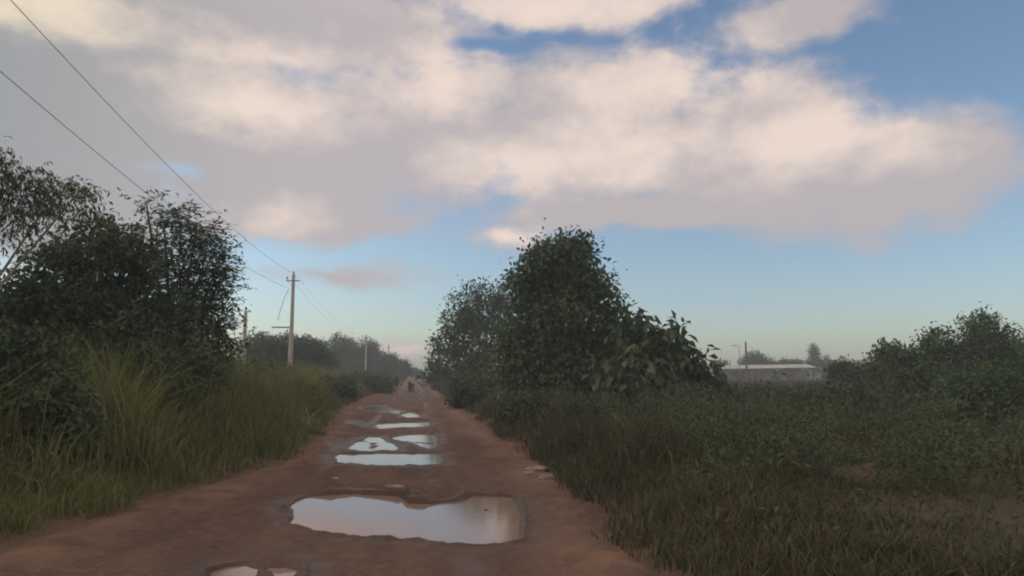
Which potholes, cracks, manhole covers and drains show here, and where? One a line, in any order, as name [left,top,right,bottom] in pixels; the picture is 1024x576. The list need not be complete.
pothole [388,433,441,449]
pothole [282,486,529,546]
pothole [196,554,310,576]
pothole [369,421,432,429]
pothole [330,451,447,466]
pothole [360,405,402,414]
pothole [340,435,403,451]
